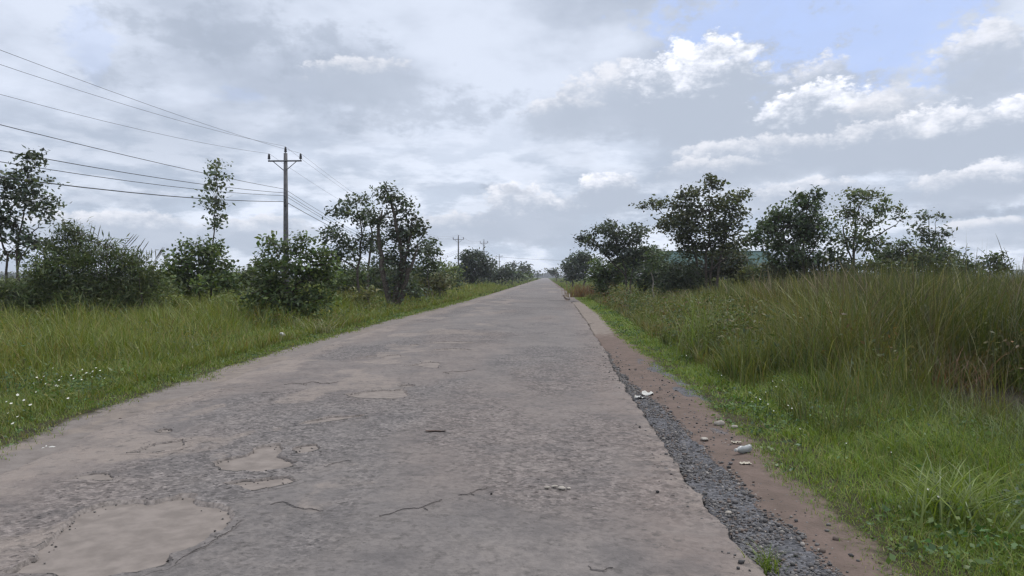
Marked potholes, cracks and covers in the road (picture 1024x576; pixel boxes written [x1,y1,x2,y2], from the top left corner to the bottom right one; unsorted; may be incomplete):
pothole [0,490,247,576]
pothole [339,387,414,400]
pothole [204,441,306,474]
pothole [286,442,329,455]
pothole [58,470,125,483]
crack [270,501,324,511]
pothole [214,474,307,493]
pothole [402,361,447,369]
crack [379,499,442,516]
